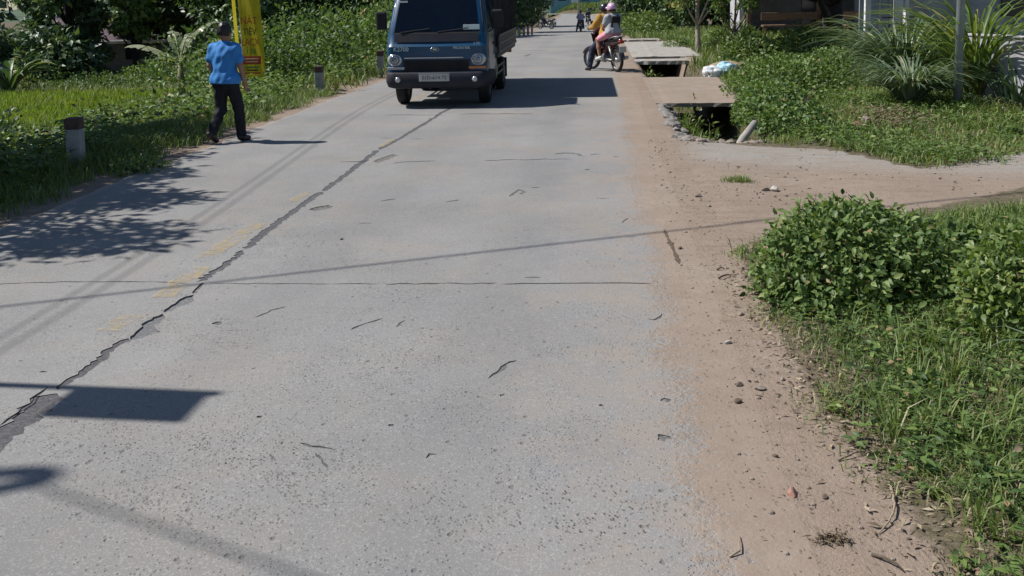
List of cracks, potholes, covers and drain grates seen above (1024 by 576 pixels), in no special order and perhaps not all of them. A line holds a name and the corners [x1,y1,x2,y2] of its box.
crack [489,360,517,378]
crack [301,443,334,468]
crack [351,318,405,330]
crack [5,106,456,284]
crack [0,338,130,452]
